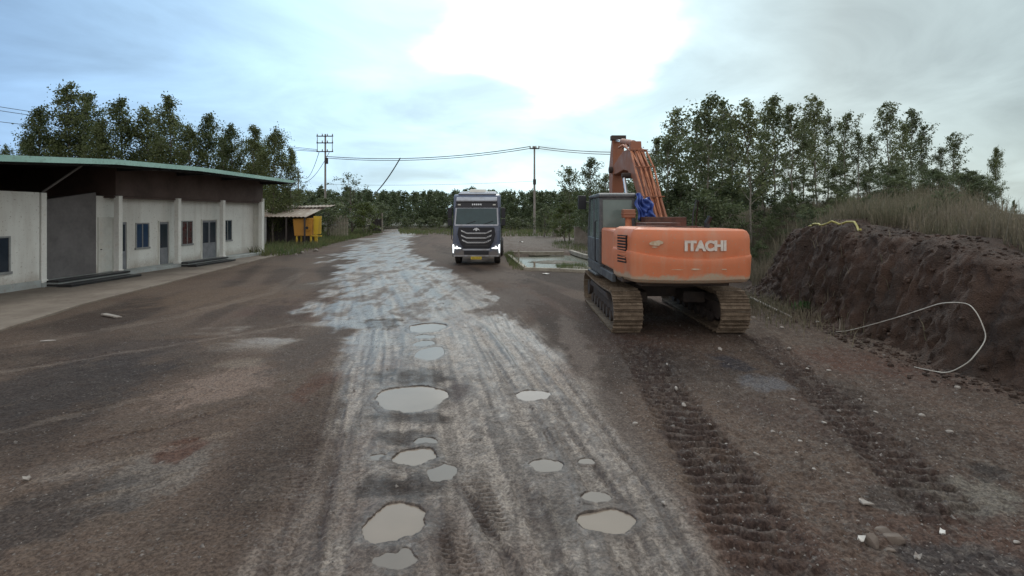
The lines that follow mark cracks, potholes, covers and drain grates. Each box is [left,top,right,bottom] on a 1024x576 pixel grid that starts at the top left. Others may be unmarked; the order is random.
pothole [366,383,457,418]
pothole [505,386,561,406]
pothole [407,344,450,364]
pothole [571,455,601,468]
pothole [346,495,439,557]
pothole [364,451,388,463]
pothole [516,454,575,477]
pothole [556,502,657,546]
pothole [570,486,622,505]
pothole [405,434,446,449]
pothole [356,541,434,576]
pothole [404,322,452,334]
